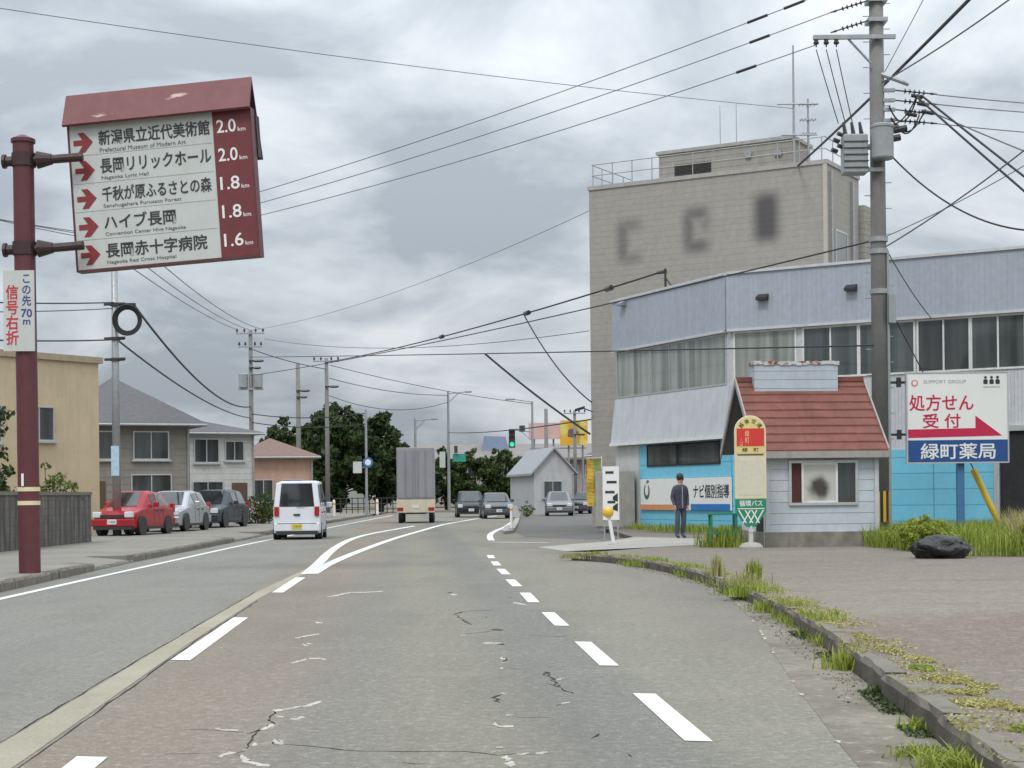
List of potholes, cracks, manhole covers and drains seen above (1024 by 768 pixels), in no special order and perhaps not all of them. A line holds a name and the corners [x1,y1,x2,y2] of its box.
crack [448,592,512,669]
crack [192,672,574,768]
